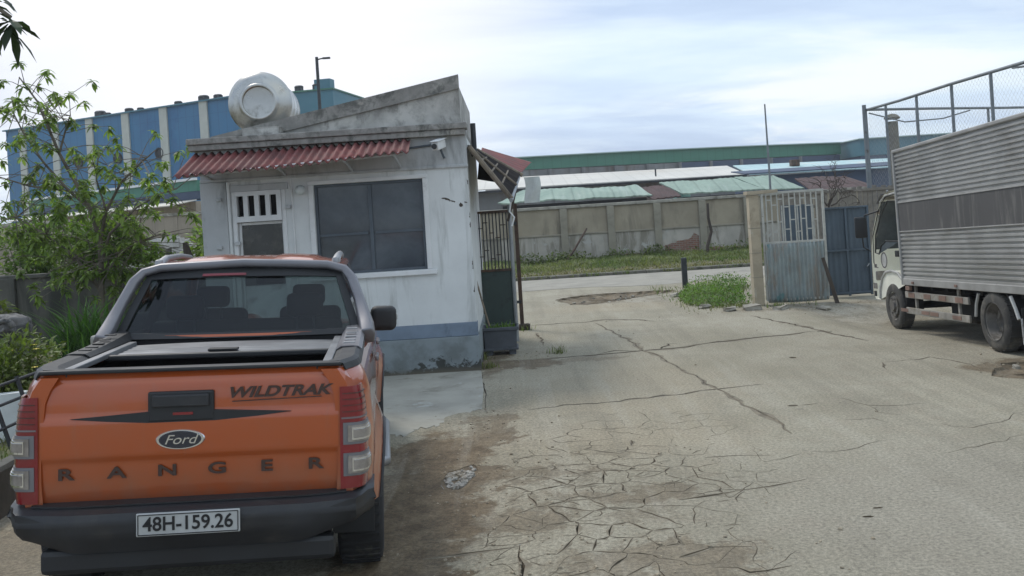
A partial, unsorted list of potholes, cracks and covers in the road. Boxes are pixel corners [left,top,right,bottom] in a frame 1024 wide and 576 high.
crack [942,413,1020,453]
pothole [557,290,679,305]
pothole [991,362,1024,379]
